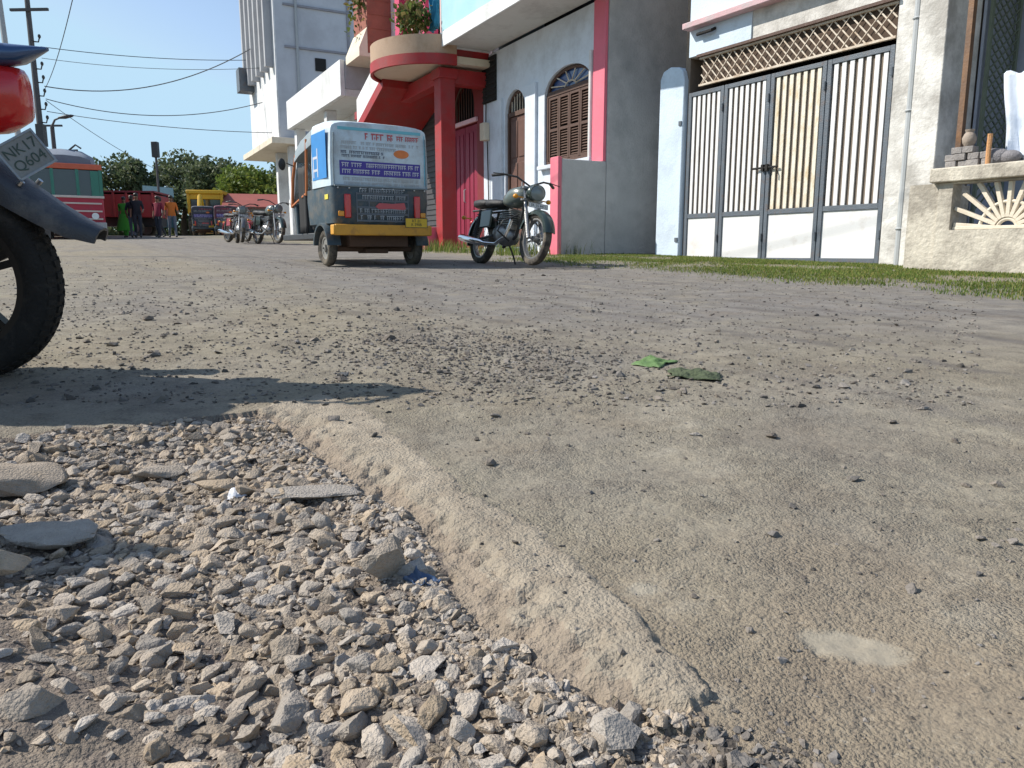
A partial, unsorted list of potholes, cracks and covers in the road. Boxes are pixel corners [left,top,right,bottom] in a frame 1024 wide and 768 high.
pothole [0,394,722,768]
